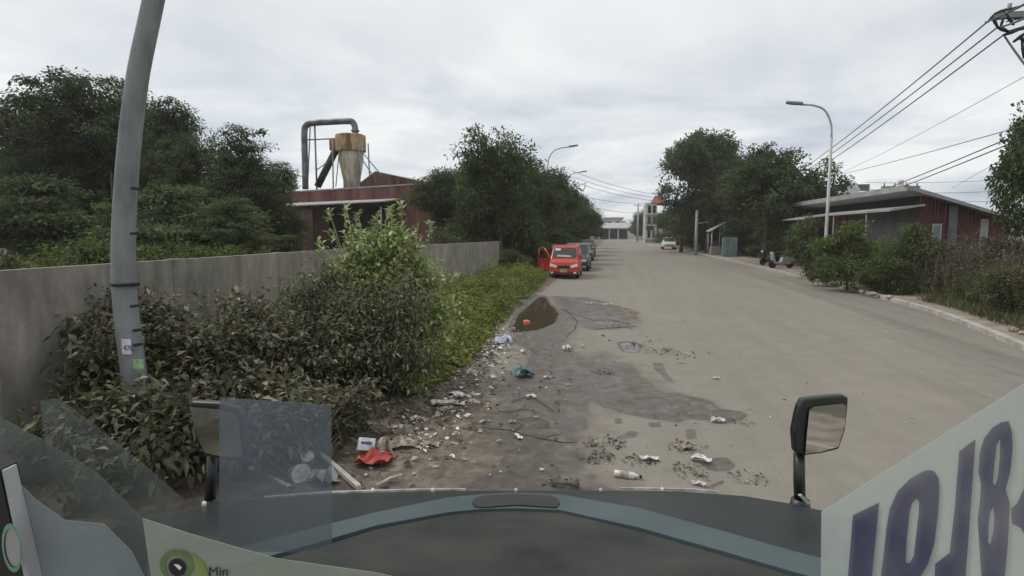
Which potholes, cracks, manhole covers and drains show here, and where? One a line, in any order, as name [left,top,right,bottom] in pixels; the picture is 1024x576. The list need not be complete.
pothole [508,295,560,333]
crack [477,420,578,443]
pothole [618,341,643,352]
crack [560,308,633,336]
